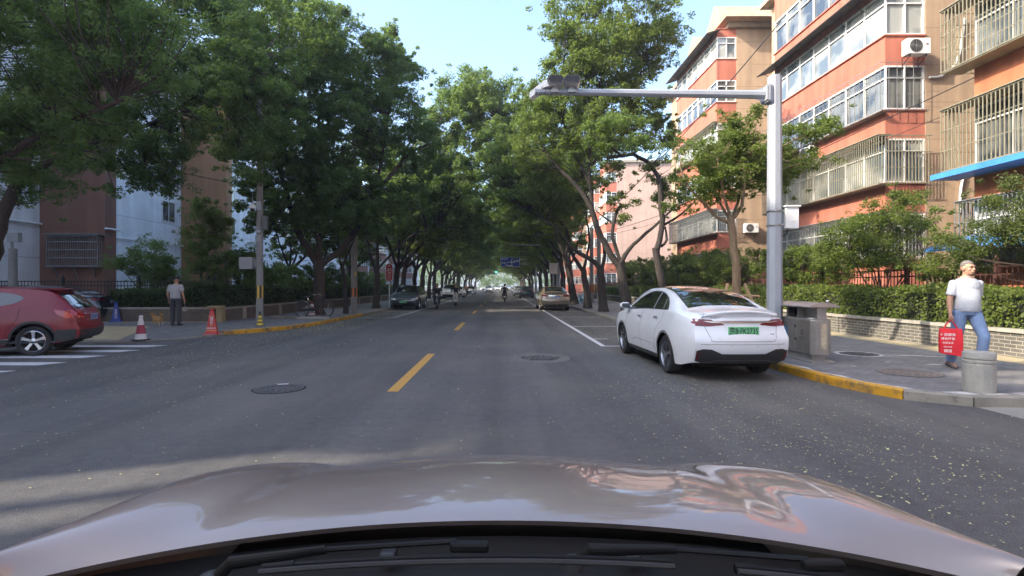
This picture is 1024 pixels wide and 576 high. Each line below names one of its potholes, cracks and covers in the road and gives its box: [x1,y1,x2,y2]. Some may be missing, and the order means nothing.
manhole cover [510,353,573,363]
manhole cover [875,368,946,378]
manhole cover [251,383,306,394]
